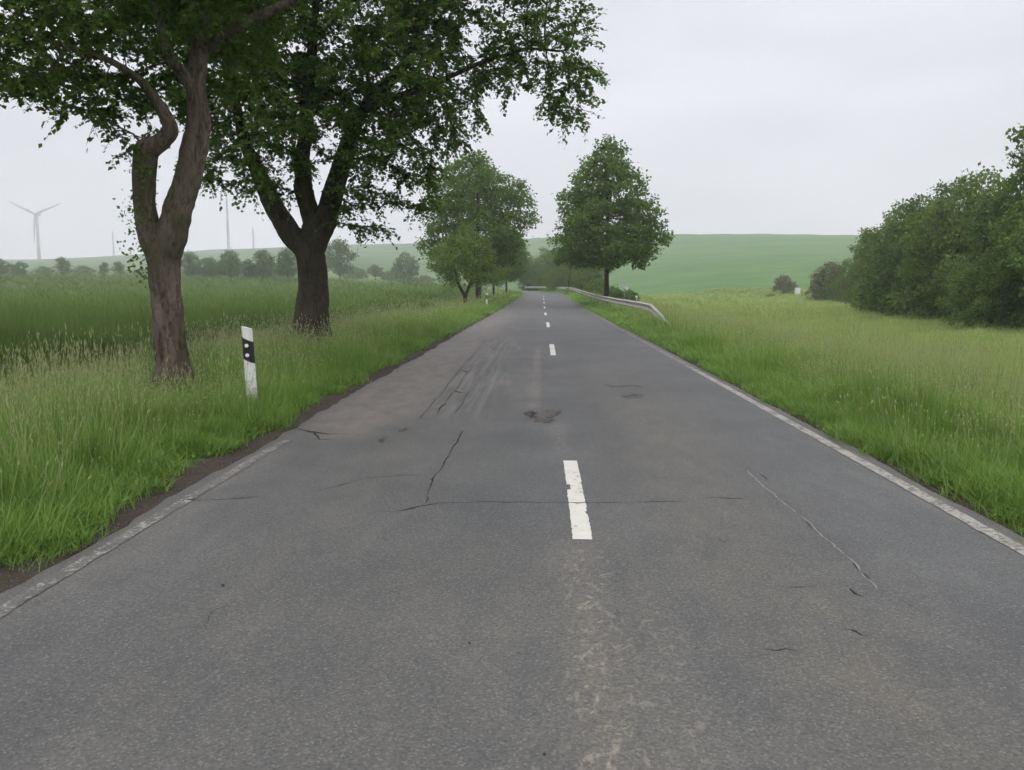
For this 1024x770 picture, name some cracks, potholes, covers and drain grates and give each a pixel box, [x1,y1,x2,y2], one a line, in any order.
crack [709,469,909,605]
crack [339,432,675,511]
crack [420,346,481,419]
pothole [523,409,562,423]
